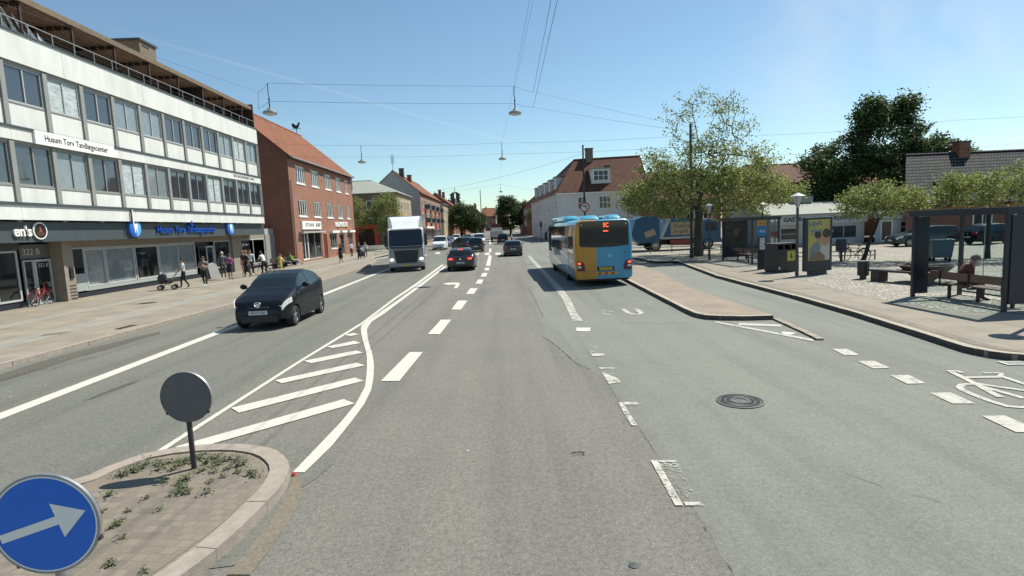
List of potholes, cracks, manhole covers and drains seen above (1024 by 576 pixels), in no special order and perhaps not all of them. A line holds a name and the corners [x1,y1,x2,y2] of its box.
manhole cover [716,394,765,409]
